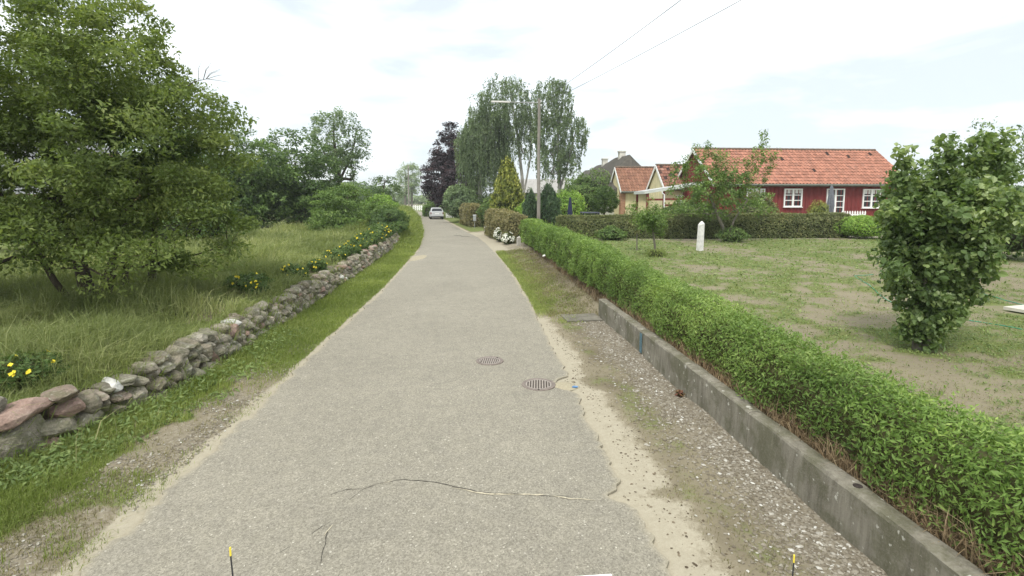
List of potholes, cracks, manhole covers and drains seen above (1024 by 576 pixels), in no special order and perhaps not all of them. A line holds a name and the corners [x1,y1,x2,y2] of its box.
crack [276,479,590,564]
manhole cover [476,356,503,365]
manhole cover [522,378,556,391]
